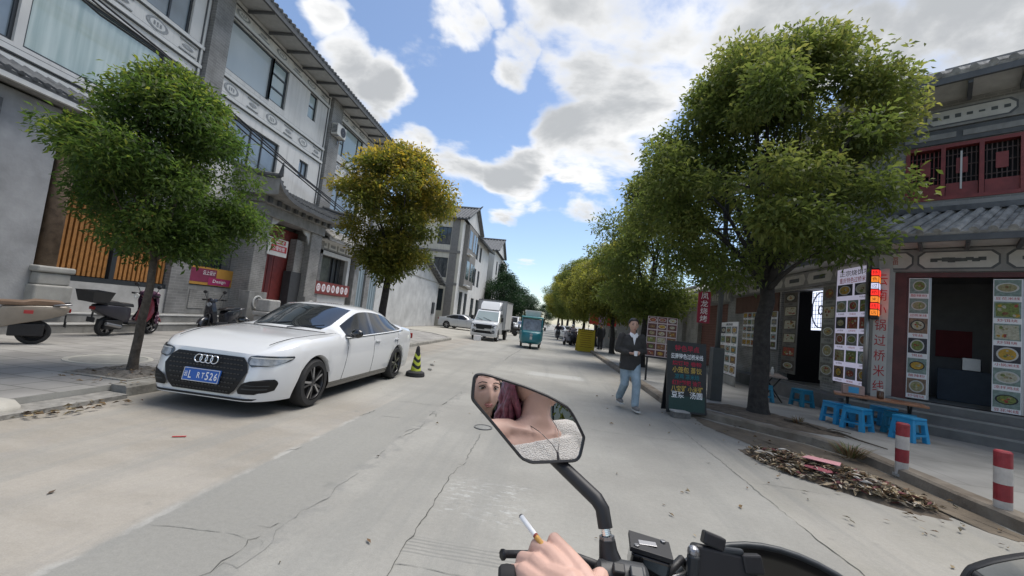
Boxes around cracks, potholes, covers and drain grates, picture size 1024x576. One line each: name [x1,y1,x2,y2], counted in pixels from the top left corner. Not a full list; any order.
manhole cover [61,354,154,365]
crack [152,473,358,576]
crack [387,435,480,576]
